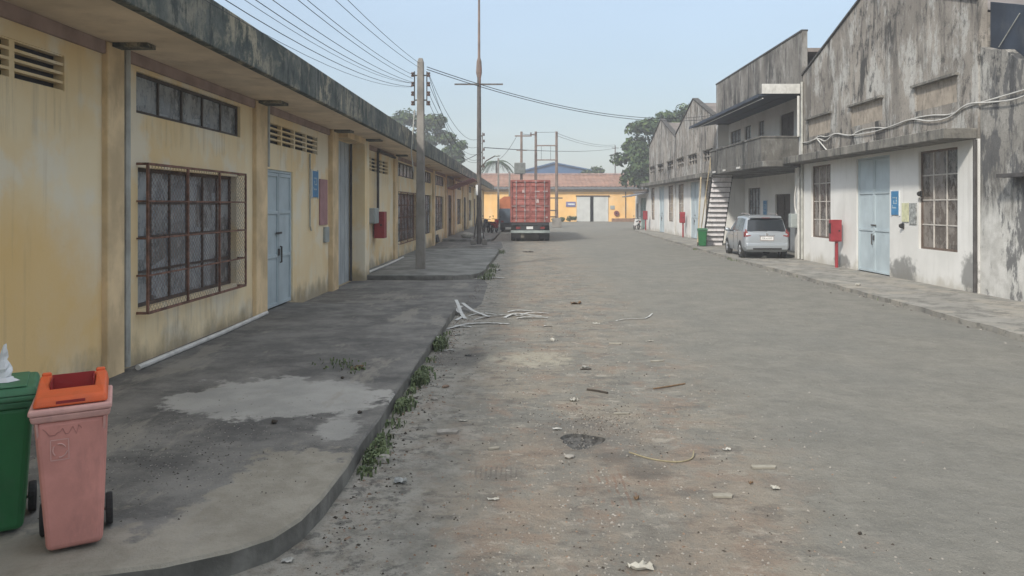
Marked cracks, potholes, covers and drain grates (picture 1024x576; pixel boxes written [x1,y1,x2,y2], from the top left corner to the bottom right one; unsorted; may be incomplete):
pothole [559,434,607,451]
